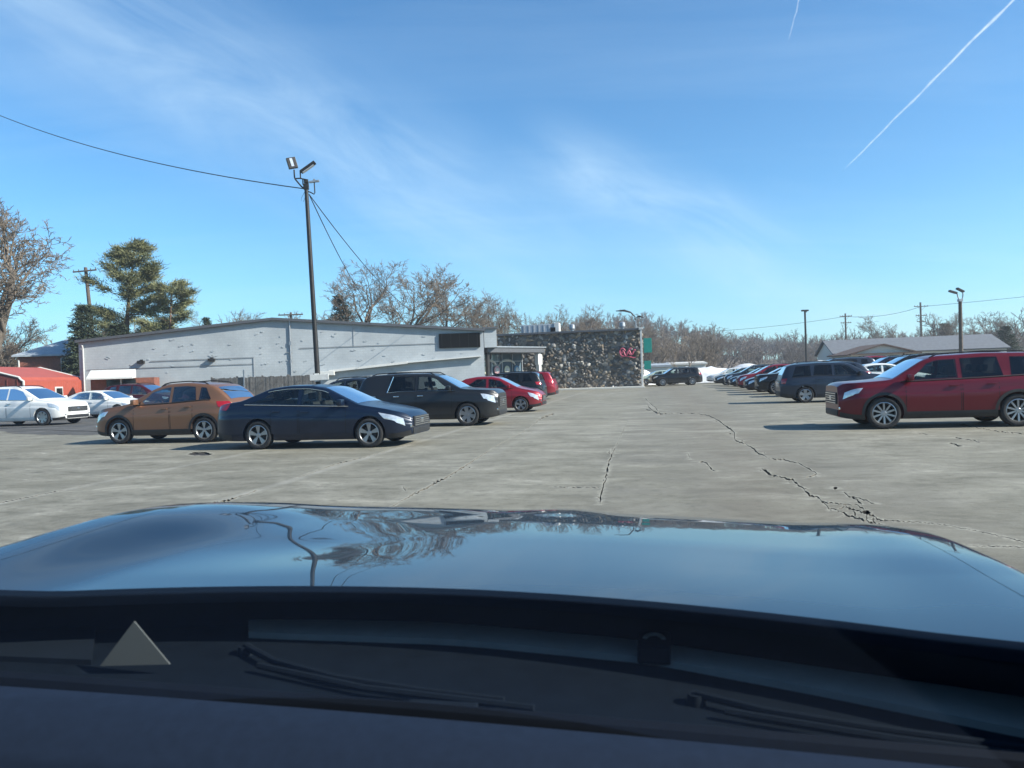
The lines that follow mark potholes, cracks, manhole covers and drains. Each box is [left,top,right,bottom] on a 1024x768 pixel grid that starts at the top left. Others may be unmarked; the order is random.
crack [668,413,1022,548]
crack [564,423,627,502]
